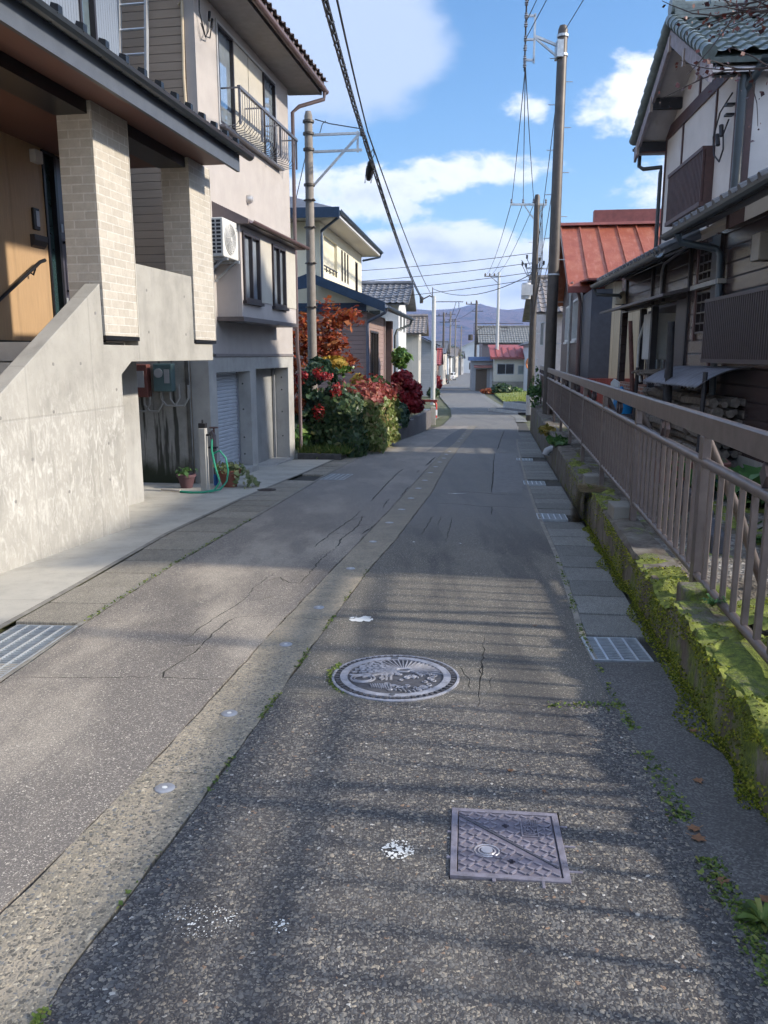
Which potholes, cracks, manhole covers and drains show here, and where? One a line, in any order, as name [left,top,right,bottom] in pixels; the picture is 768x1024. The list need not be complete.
drain grate [581,637,654,662]
manhole cover [446,807,583,889]
drain grate [536,513,568,522]
crack [453,637,492,707]
manhole cover [331,655,460,702]
drain grate [0,624,77,678]
crack [179,469,408,645]
